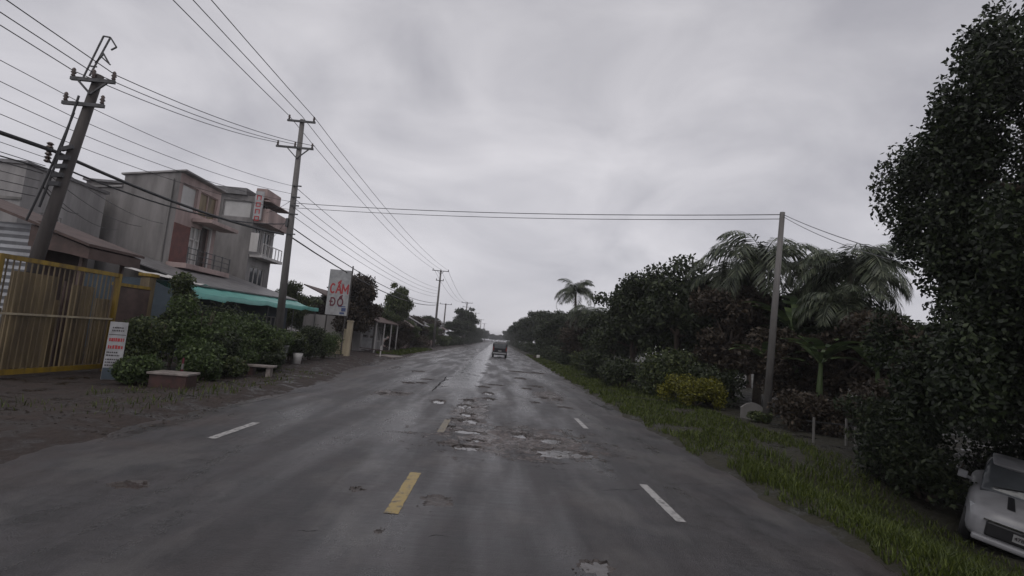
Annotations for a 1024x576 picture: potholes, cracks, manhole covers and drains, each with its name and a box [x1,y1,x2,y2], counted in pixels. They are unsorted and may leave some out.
pothole [576,559,616,576]
pothole [106,480,151,490]
pothole [529,447,599,459]
pothole [419,494,454,507]
pothole [534,437,568,445]
